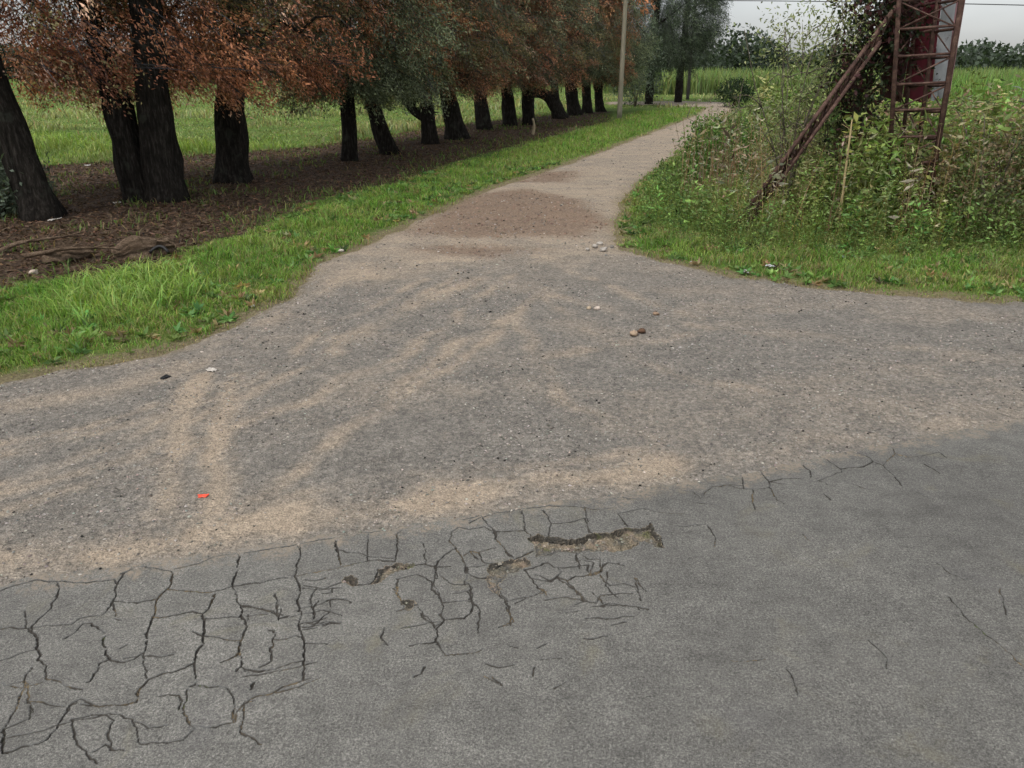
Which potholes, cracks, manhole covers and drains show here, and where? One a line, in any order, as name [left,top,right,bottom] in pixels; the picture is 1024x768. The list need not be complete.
crack [683,448,948,510]
pothole [342,575,359,587]
crack [678,523,717,547]
crack [935,562,1024,668]
crack [0,497,686,765]
pothole [485,557,531,596]
pothole [527,523,665,557]
pothole [371,563,415,585]
crack [867,639,889,669]
crack [785,668,800,696]
